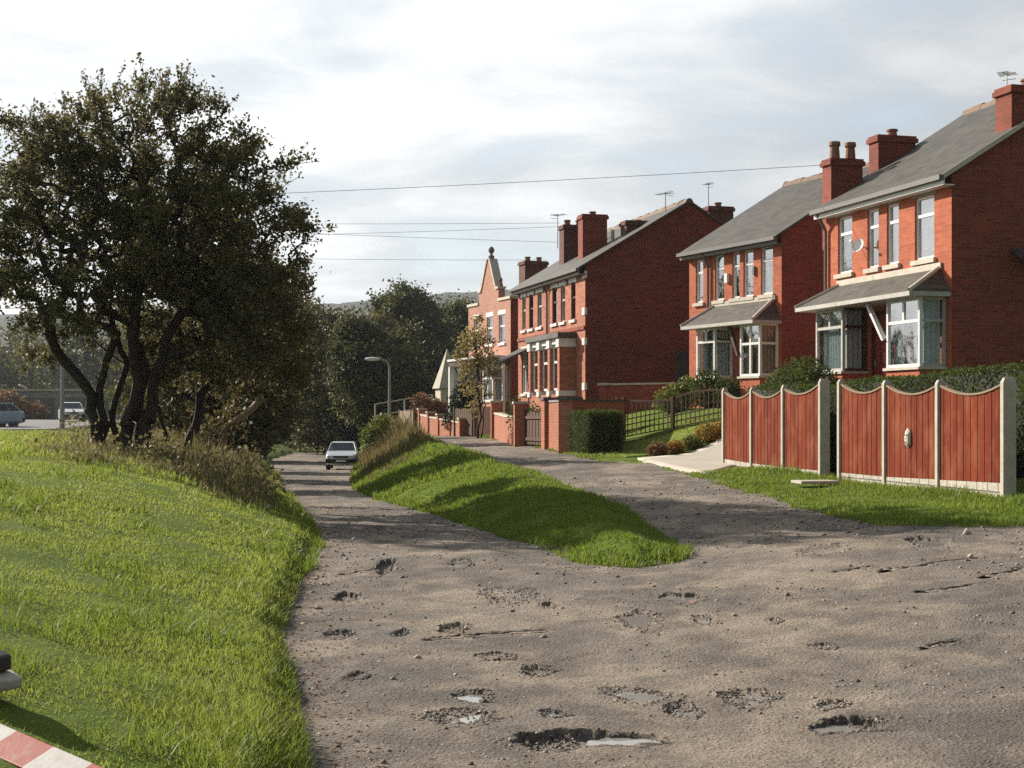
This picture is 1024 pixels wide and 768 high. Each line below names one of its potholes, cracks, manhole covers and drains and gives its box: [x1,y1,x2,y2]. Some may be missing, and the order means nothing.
crack [916,639,966,649]
pothole [468,650,519,661]
pothole [446,687,495,705]
pothole [660,697,706,720]
pothole [329,591,370,604]
pothole [496,727,684,753]
pothole [515,663,564,678]
pothole [591,685,686,708]
crack [834,559,1024,593]
pothole [337,670,372,682]
pothole [434,621,474,635]
pothole [371,557,397,576]
